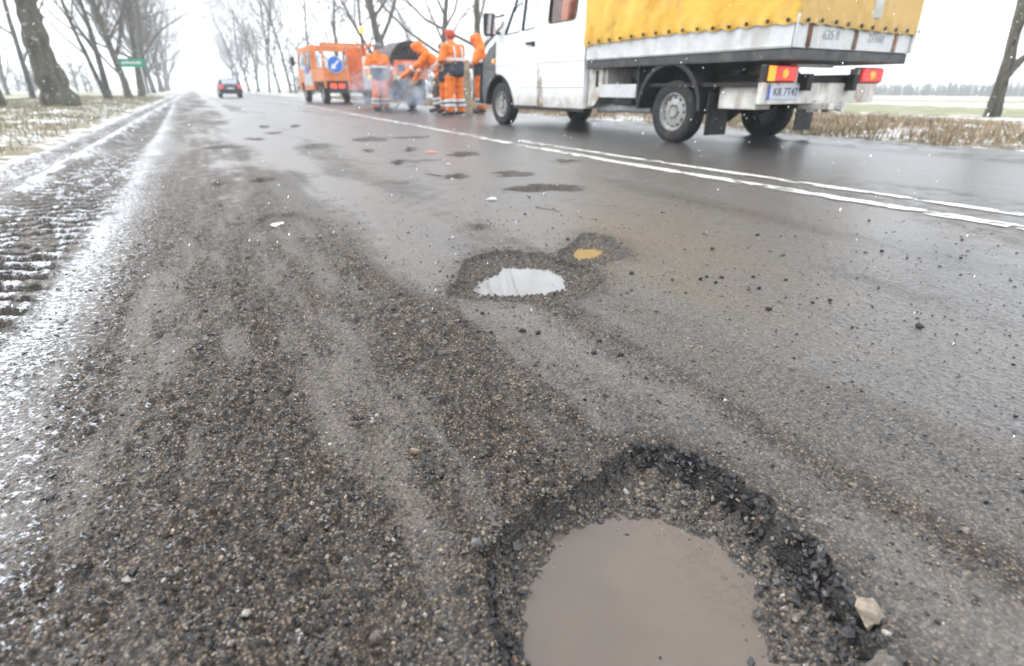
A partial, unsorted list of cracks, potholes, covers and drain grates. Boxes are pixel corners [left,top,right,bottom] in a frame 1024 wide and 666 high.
pothole [477,440,907,666]
pothole [444,249,607,303]
pothole [501,183,587,193]
pothole [555,231,634,268]
